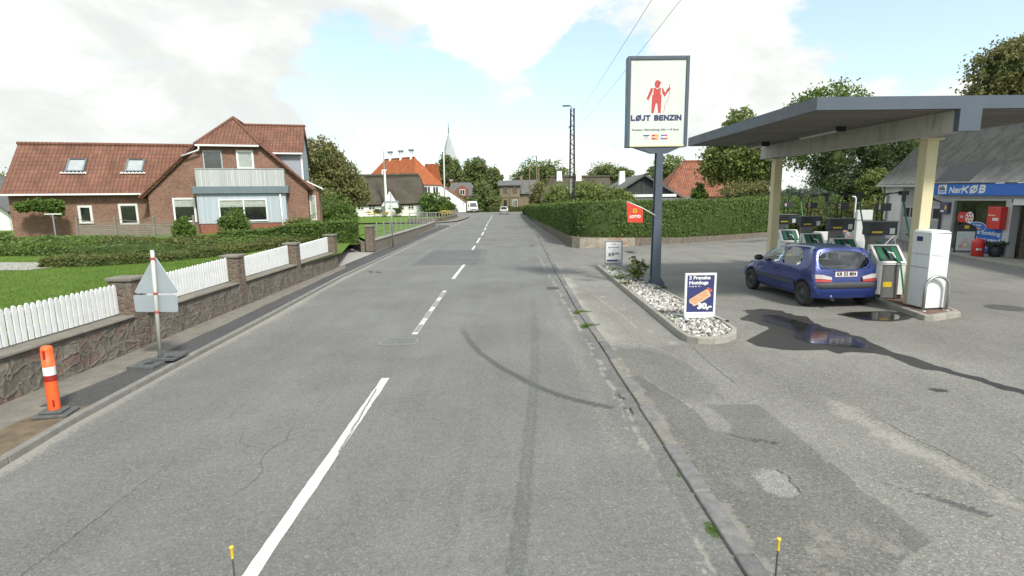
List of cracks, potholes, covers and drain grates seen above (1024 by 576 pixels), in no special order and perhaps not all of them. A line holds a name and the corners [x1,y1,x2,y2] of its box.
manhole cover [379,337,419,346]
crack [220,403,296,496]
